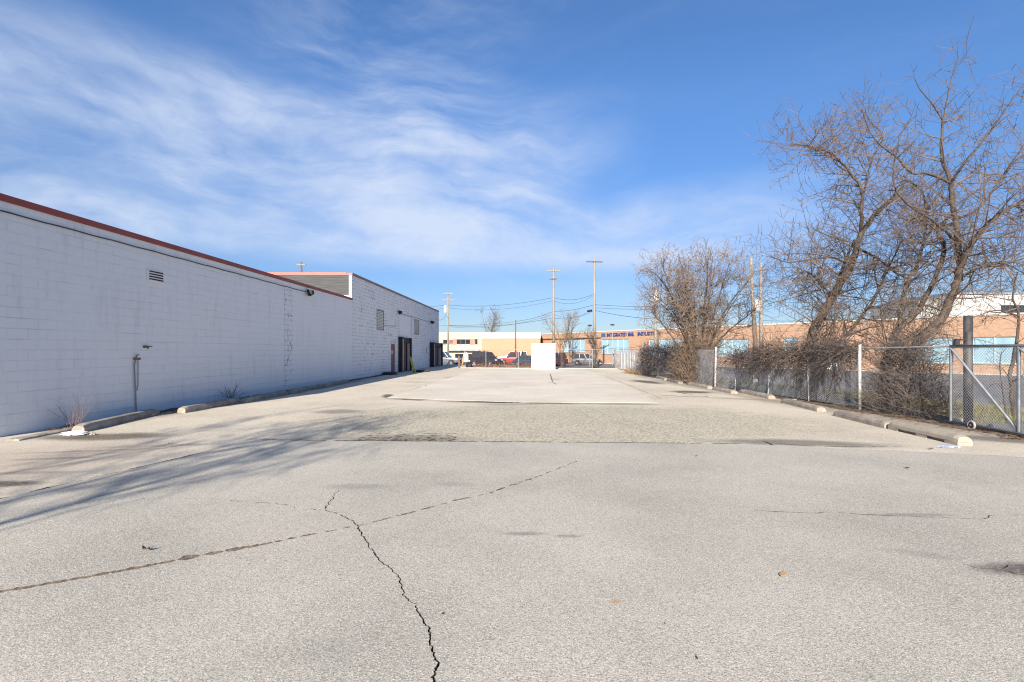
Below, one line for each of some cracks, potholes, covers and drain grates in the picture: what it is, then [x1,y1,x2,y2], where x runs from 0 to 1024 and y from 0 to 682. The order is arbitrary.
crack [0,461,577,682]
